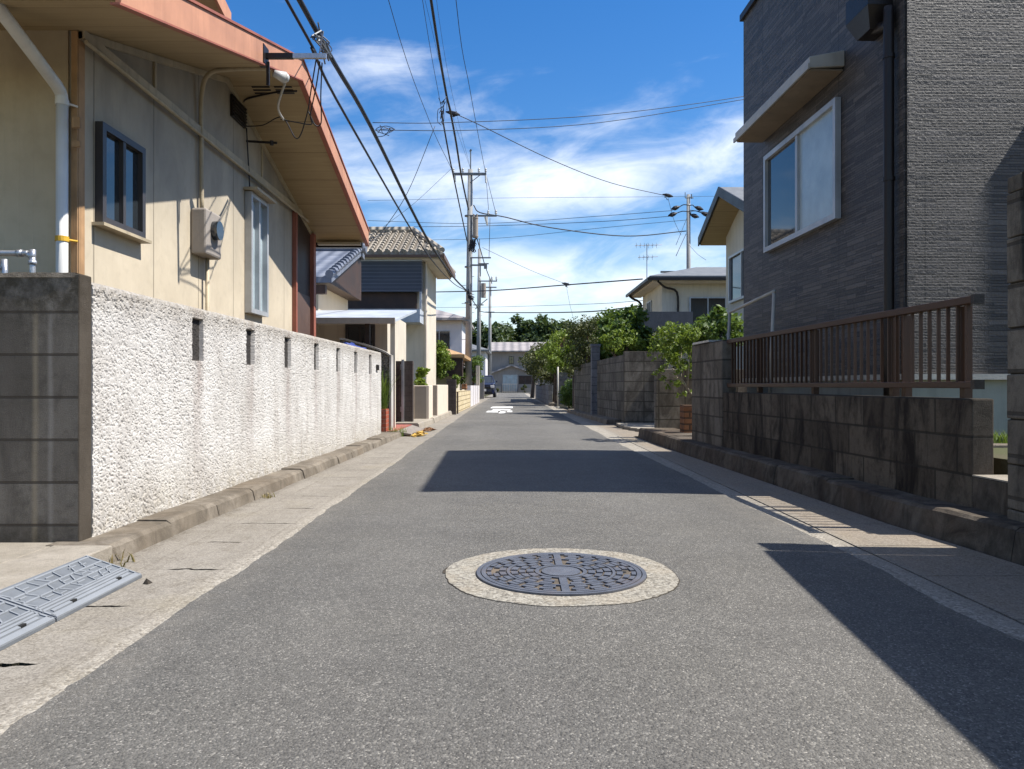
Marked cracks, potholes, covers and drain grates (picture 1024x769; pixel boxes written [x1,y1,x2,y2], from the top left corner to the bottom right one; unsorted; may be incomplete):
crack [233,508,313,524]
manhole cover [442,548,680,607]
